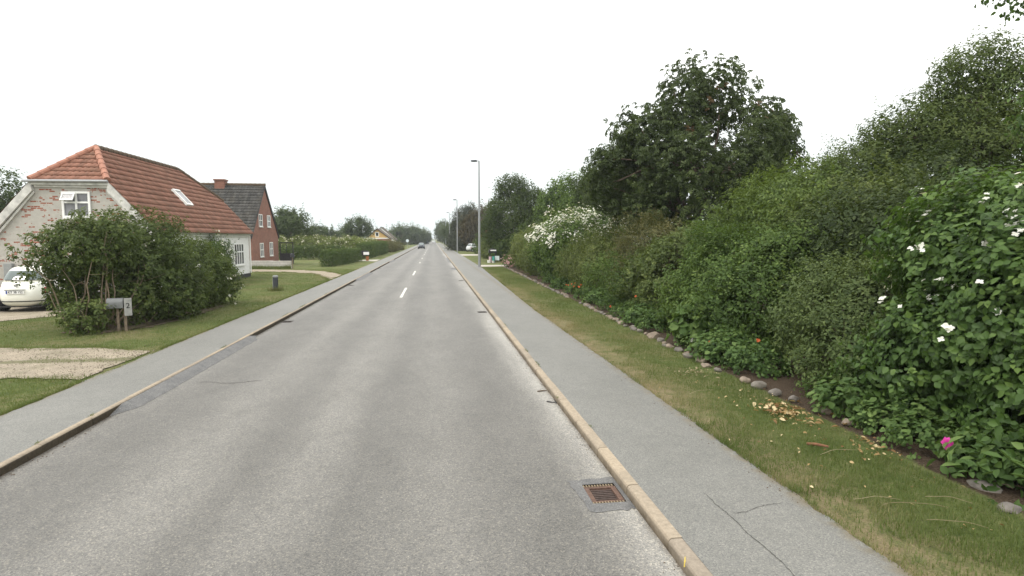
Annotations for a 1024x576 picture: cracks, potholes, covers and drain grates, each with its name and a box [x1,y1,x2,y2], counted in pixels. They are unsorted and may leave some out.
crack [706,494,795,576]
drain grate [582,483,627,504]
